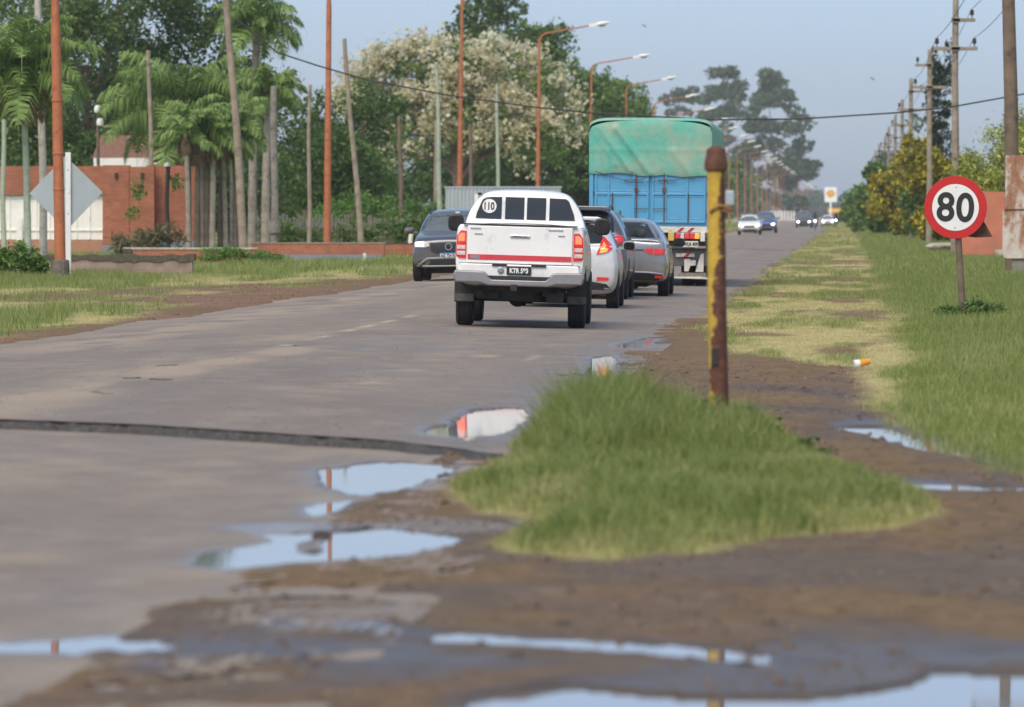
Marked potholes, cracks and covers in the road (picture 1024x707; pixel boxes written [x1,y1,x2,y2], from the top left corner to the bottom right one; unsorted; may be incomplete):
pothole [615,338,658,348]
pothole [423,407,536,447]
pothole [313,461,463,495]
pothole [580,355,622,379]
